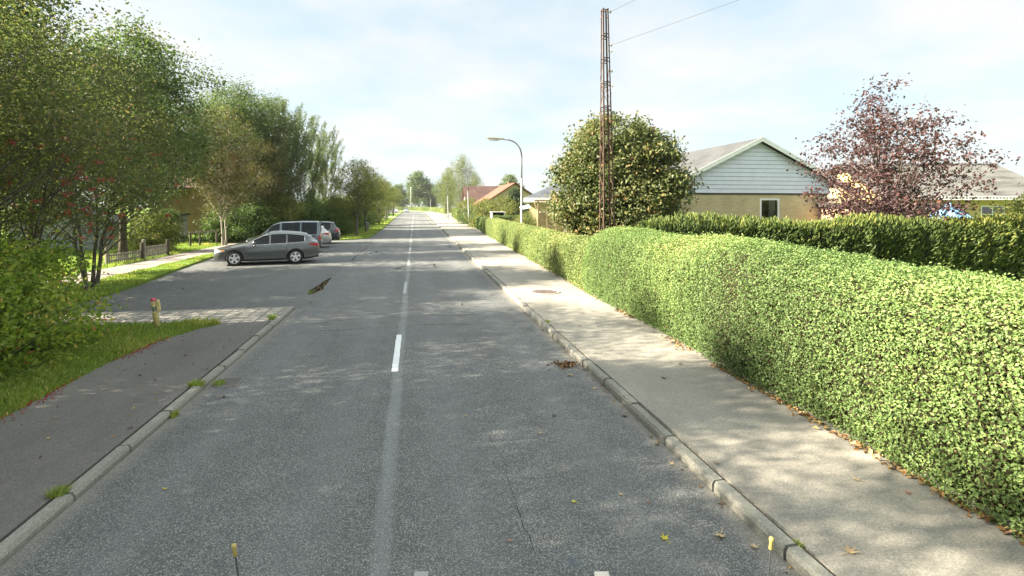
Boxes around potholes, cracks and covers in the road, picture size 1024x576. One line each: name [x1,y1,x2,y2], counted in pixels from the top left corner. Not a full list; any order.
crack [480,405,555,574]
